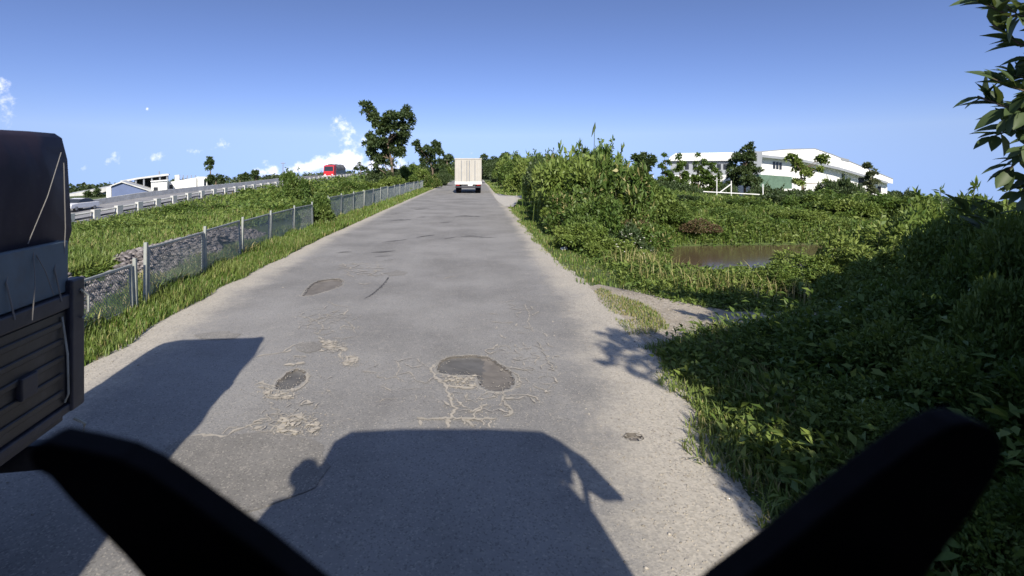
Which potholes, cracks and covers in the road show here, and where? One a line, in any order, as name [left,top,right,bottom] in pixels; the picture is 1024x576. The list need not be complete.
pothole [433,354,518,393]
pothole [271,368,310,392]
crack [339,209,476,298]
crack [192,297,559,437]
